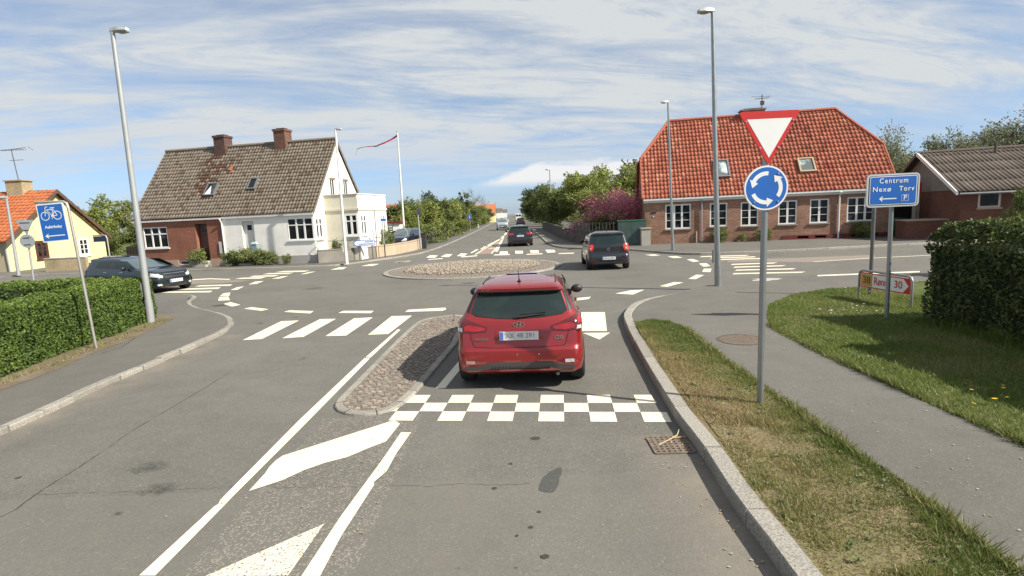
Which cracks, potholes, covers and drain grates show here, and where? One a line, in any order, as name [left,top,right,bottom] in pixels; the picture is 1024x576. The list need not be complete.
manhole cover [716,334,766,345]
drain grate [646,435,696,454]
